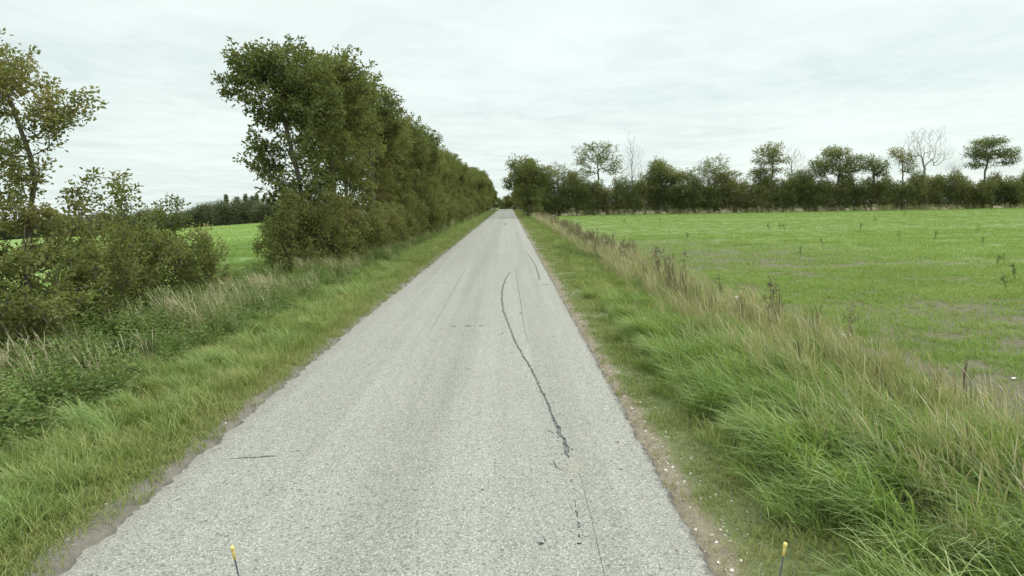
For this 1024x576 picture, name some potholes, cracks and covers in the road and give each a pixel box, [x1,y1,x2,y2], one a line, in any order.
crack [208,448,302,459]
crack [426,270,483,338]
crack [500,252,605,576]
